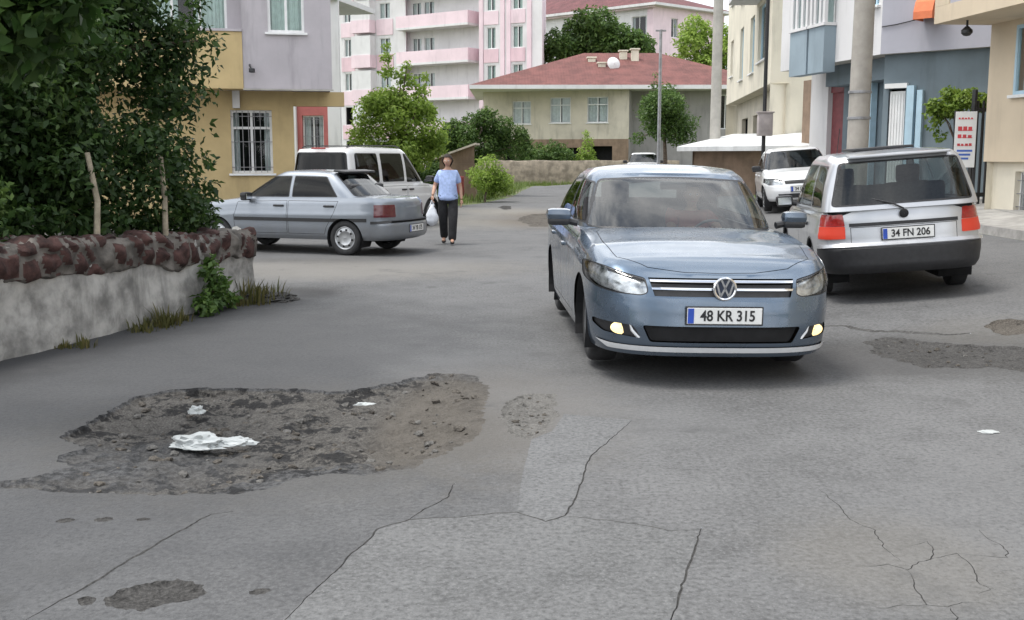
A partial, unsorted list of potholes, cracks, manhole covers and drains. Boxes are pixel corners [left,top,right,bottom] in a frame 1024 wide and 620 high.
crack [285,421,702,620]
pothole [103,578,207,612]
pothole [0,373,490,496]
crack [824,325,970,335]
pothole [498,393,560,439]
crack [818,488,1009,620]
